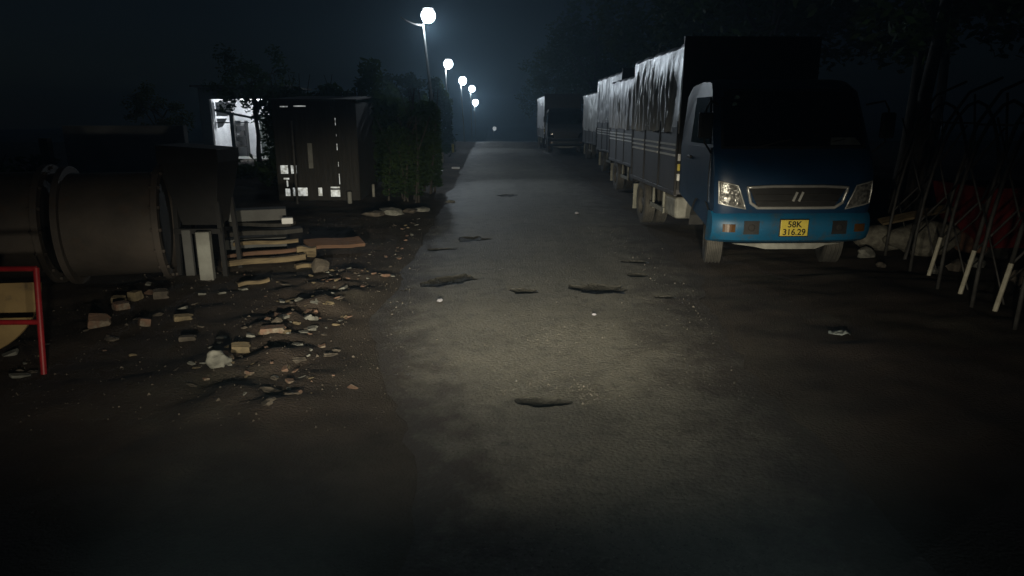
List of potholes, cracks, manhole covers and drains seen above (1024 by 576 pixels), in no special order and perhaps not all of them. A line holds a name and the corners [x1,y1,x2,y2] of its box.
pothole [568,283,628,294]
pothole [514,397,573,408]
pothole [420,273,478,288]
